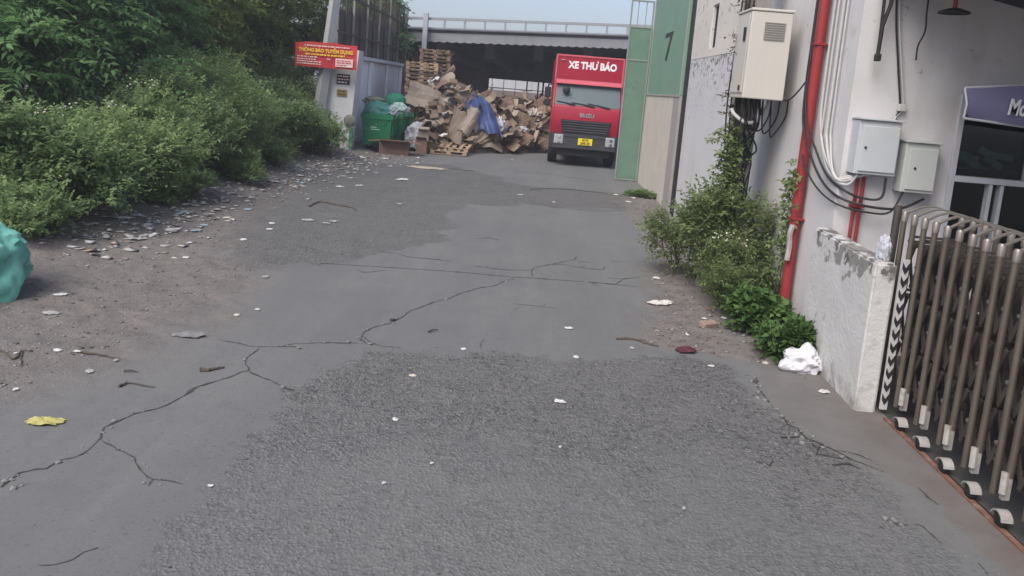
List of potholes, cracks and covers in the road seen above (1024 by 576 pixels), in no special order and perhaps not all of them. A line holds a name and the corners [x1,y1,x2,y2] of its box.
crack [881,487,942,544]
crack [0,276,514,491]
crack [745,372,884,472]
crack [321,252,636,287]
